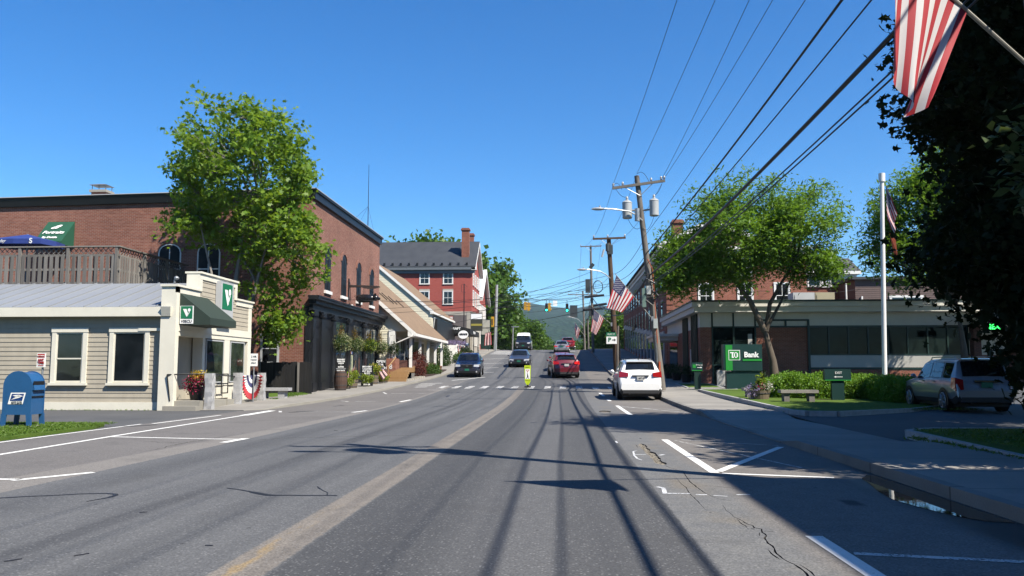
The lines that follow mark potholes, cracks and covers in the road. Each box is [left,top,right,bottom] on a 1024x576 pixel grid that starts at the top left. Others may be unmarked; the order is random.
crack [677,471,815,576]
